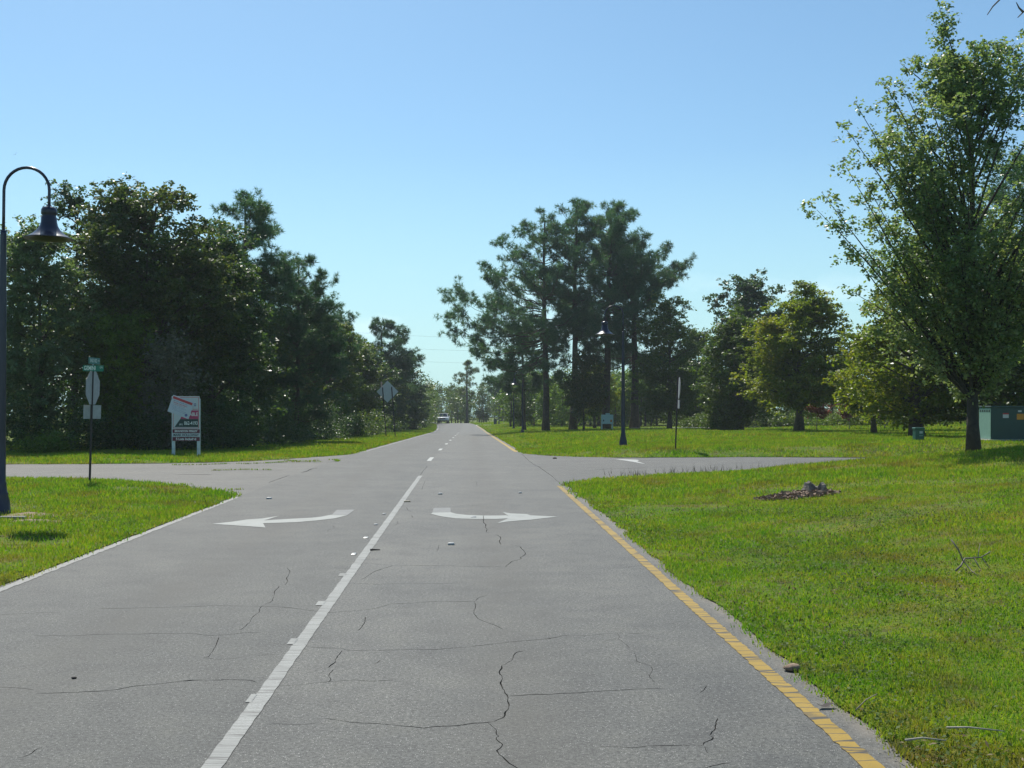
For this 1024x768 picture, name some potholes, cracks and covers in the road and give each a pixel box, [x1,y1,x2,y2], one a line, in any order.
crack [52,546,502,659]
crack [11,679,257,694]
crack [608,718,726,768]
crack [287,633,660,768]
